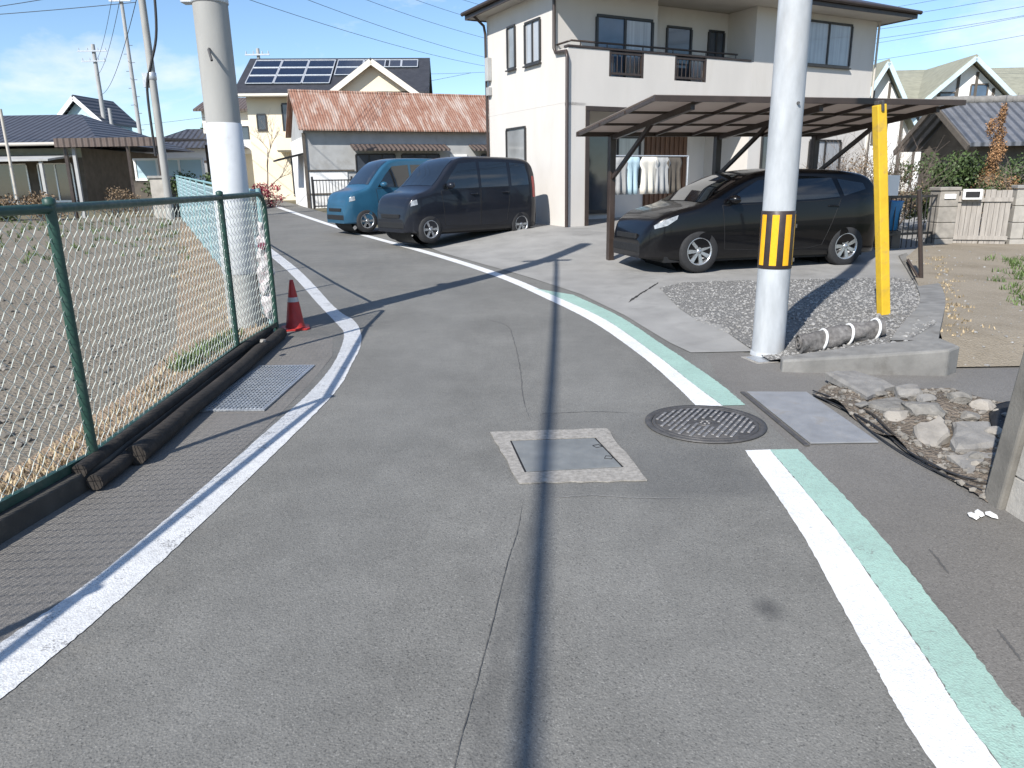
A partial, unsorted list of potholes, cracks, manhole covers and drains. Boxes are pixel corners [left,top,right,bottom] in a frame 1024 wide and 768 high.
crack [997,629,1022,662]
crack [499,322,630,418]
manhole cover [645,405,767,443]
crack [454,503,523,767]
drain grate [199,365,315,412]
